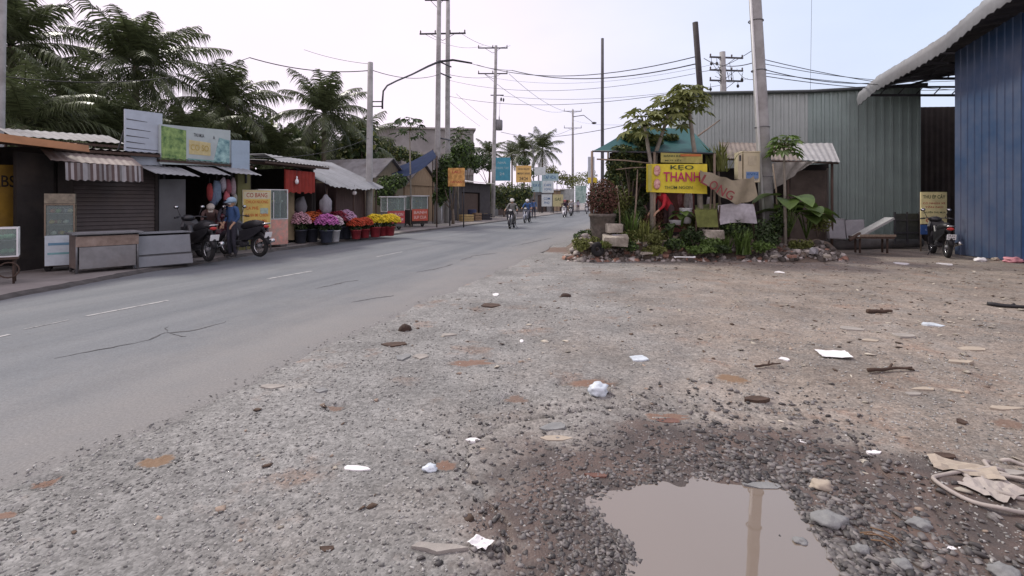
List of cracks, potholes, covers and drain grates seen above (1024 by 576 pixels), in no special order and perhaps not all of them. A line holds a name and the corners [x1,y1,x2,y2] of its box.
pothole [465,407,993,576]
crack [54,321,226,359]
